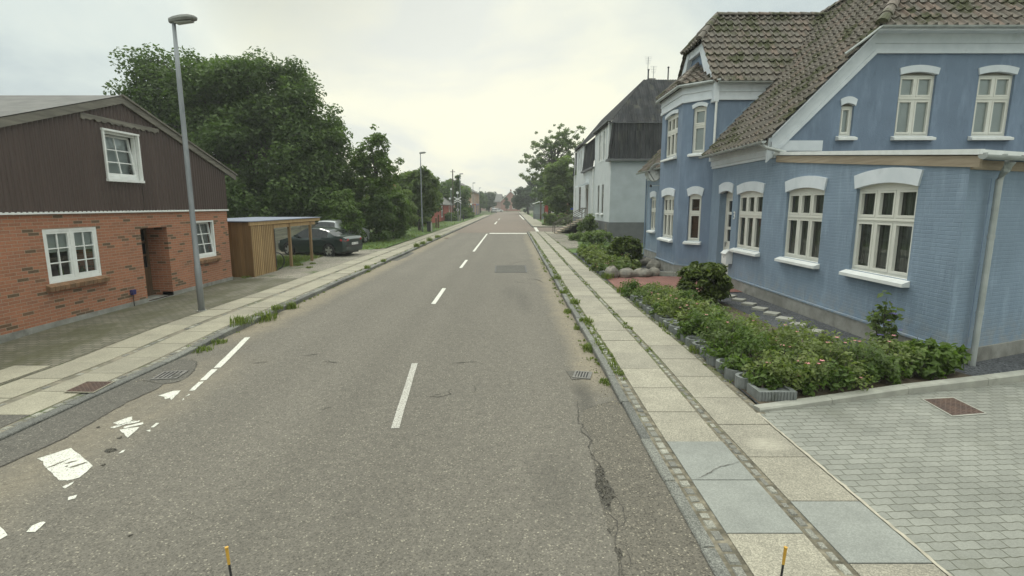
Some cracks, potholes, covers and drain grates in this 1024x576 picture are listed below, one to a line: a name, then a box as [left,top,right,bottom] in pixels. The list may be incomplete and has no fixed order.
crack [607,497,631,576]
drain grate [566,370,592,380]
drain grate [150,370,189,380]
manhole cover [64,381,115,393]
manhole cover [922,397,988,417]
crack [577,401,619,467]
